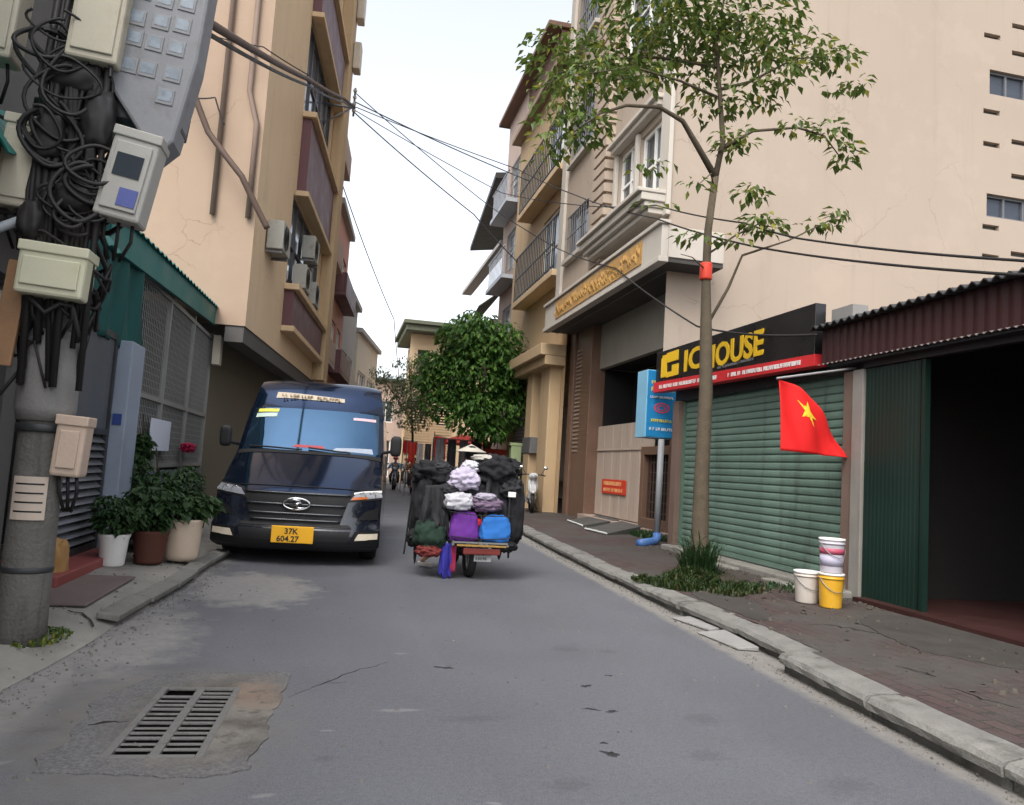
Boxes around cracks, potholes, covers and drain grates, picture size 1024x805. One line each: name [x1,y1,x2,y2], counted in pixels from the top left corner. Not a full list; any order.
crack [897,666,1019,708]
crack [290,662,386,697]
drain grate [99,686,241,758]
crack [813,624,878,634]
